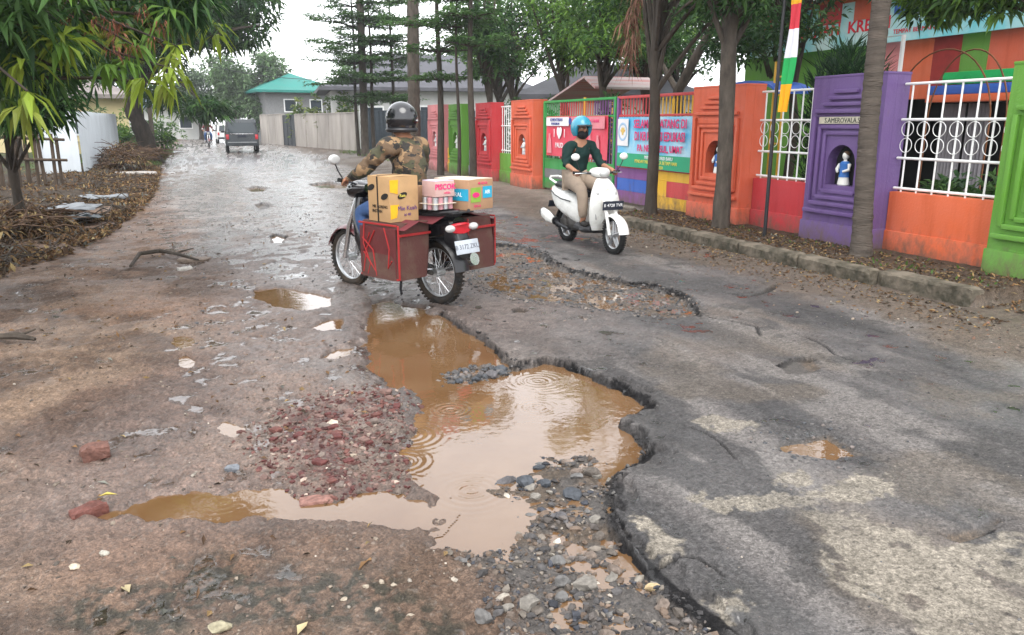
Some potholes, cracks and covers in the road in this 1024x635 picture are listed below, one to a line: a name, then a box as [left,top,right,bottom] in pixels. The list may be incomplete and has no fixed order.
pothole [164,332,206,351]
pothole [344,291,737,635]
crack [684,424,741,462]
pothole [206,413,254,441]
crack [705,283,839,337]
pothole [63,478,446,538]
pothole [309,342,362,362]
pothole [243,282,342,312]
pothole [770,355,835,376]
pothole [446,242,707,322]
crack [798,327,906,362]
pothole [758,425,882,465]
